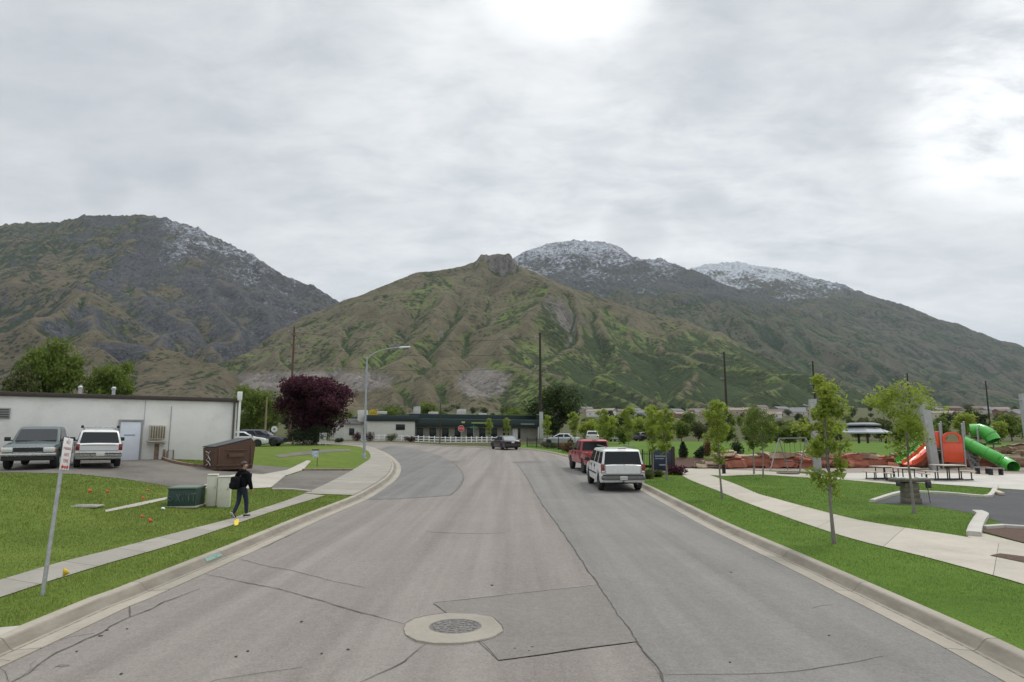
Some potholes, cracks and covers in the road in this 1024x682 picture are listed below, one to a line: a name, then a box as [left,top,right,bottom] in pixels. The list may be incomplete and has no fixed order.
manhole cover [404,613,503,644]
crack [0,590,195,682]
